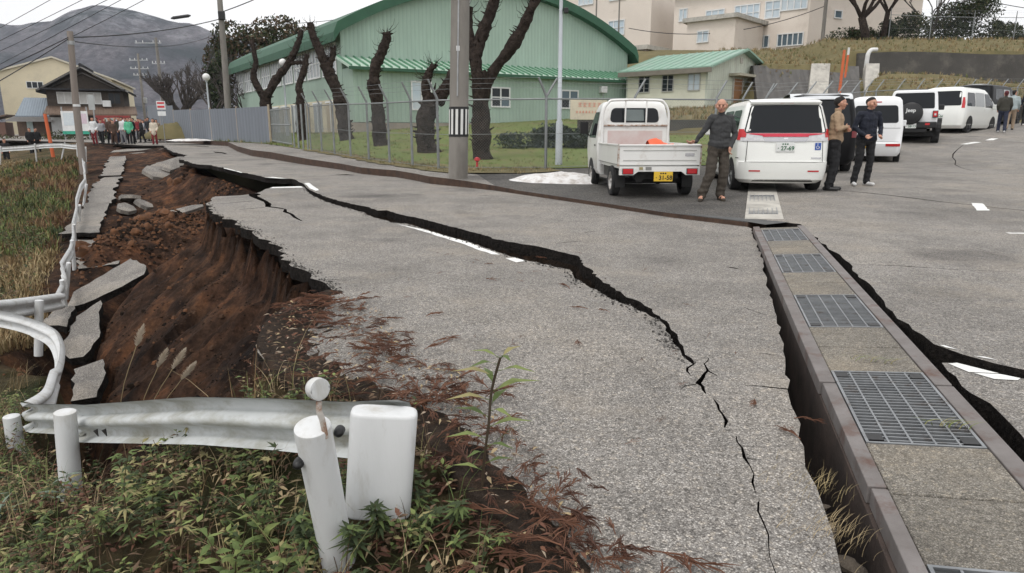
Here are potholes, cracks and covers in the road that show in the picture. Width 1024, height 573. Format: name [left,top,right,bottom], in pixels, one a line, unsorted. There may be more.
drain grate [793,294,884,328]
drain grate [774,253,836,273]
crack [234,193,301,221]
crack [366,213,775,570]
drain grate [831,370,987,449]
